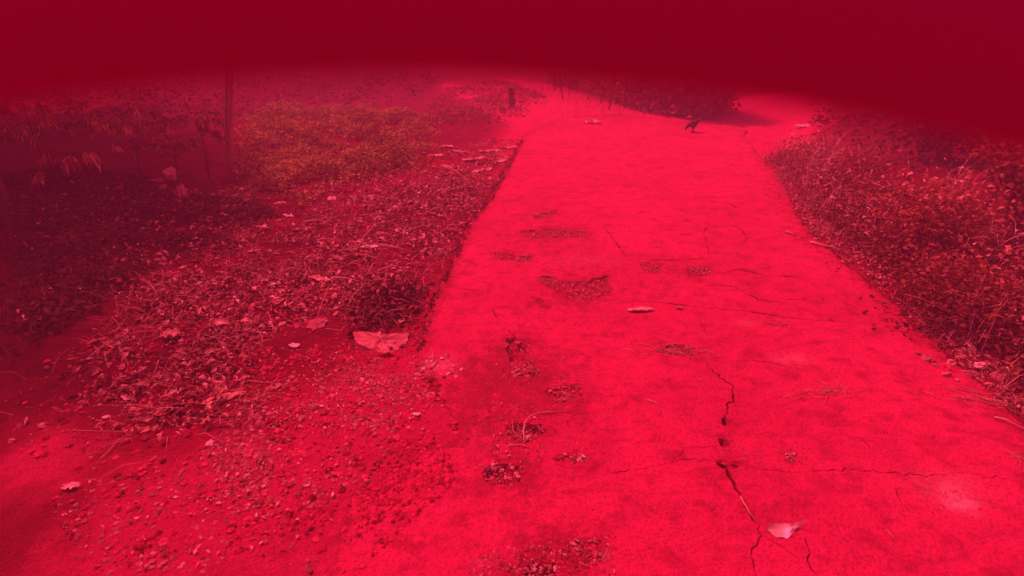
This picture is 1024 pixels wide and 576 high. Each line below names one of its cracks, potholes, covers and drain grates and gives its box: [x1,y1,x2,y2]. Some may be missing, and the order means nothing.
crack [626,347,995,573]
pothole [539,275,615,303]
pothole [522,563,560,576]
pothole [482,463,527,485]
pothole [533,210,559,219]
pothole [660,344,696,356]
pothole [573,538,608,565]
pothole [546,385,587,403]
pothole [493,252,536,262]
pothole [520,229,588,239]
